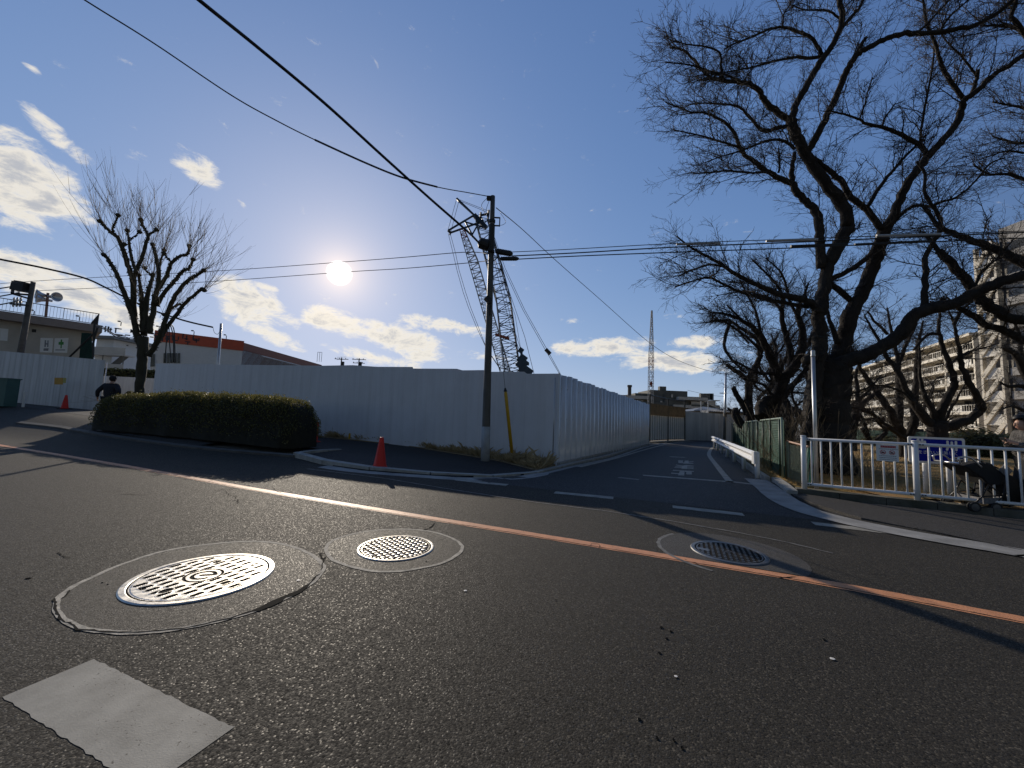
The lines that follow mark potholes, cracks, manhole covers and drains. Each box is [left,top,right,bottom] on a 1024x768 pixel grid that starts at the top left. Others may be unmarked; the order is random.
manhole cover [660,533,812,577]
manhole cover [52,541,326,635]
manhole cover [324,529,464,572]
